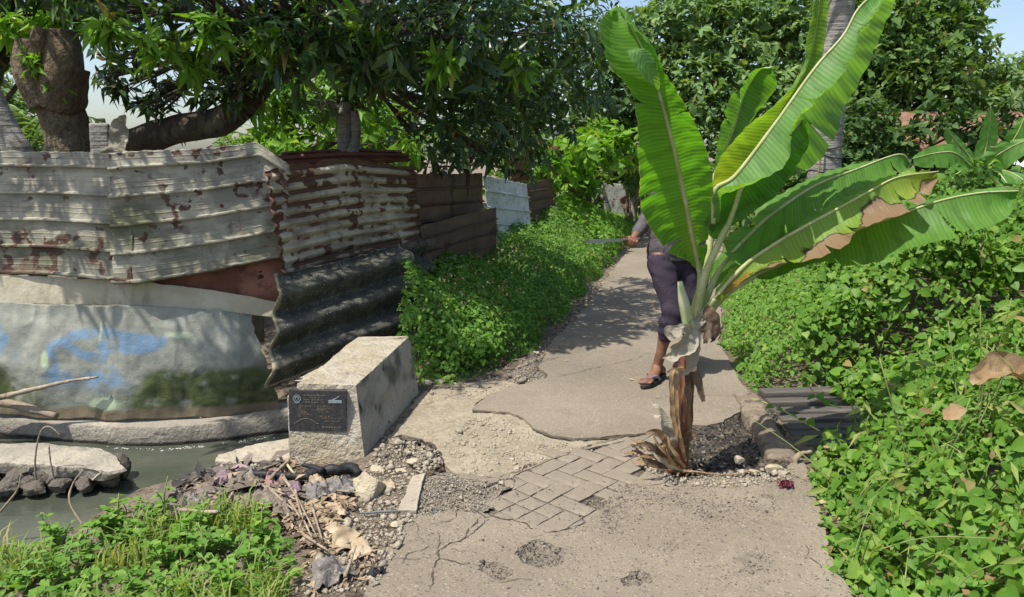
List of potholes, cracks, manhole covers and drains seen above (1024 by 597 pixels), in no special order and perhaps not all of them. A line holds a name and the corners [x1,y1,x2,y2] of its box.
pothole [621,570,652,587]
pothole [479,563,513,580]
crack [391,509,584,592]
pothole [515,540,565,569]
